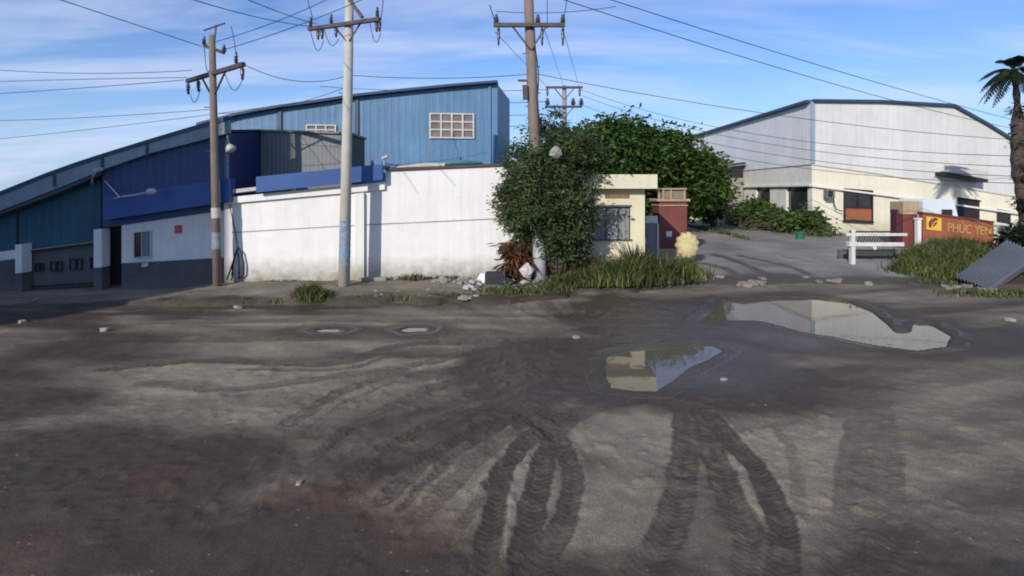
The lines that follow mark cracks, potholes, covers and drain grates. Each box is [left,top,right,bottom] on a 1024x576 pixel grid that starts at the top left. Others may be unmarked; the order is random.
pothole [583,337,744,399]
pothole [682,296,973,355]
